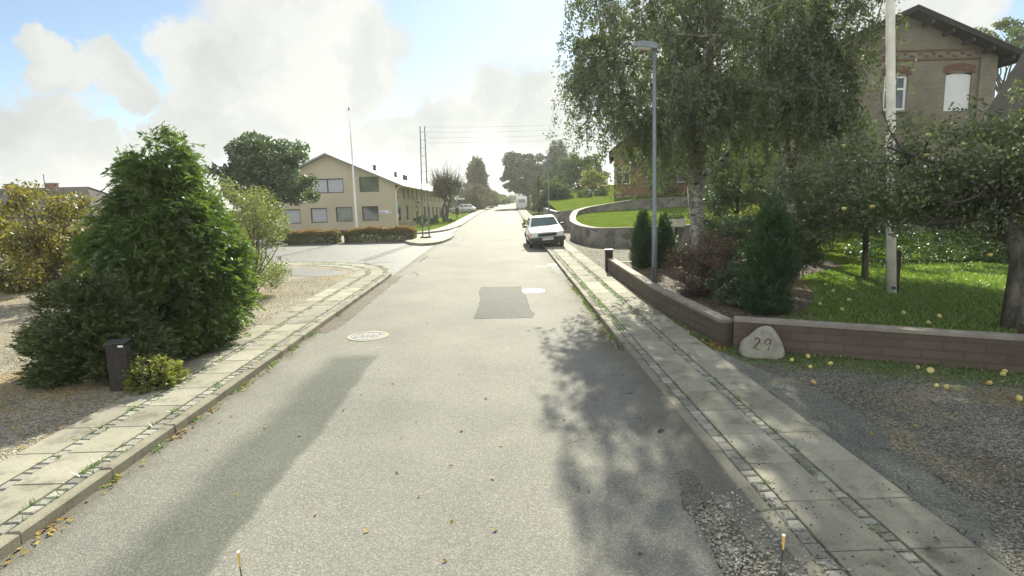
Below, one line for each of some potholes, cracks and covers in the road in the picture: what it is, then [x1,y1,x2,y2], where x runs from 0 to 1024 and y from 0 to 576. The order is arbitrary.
manhole cover [347,331,389,341]
